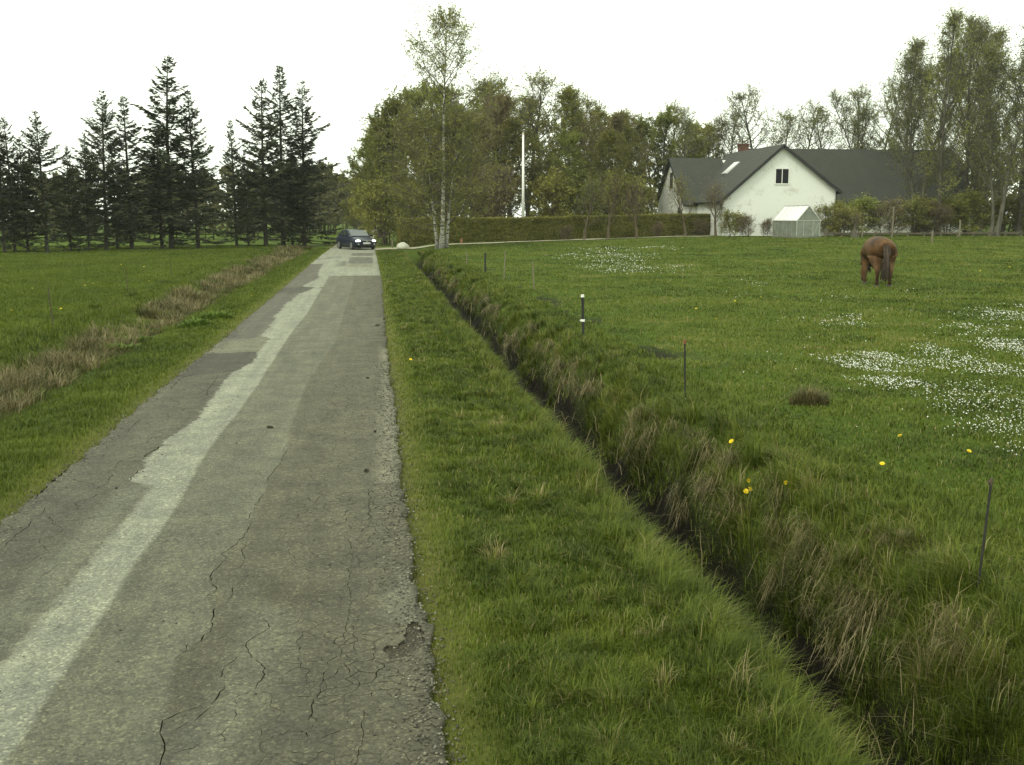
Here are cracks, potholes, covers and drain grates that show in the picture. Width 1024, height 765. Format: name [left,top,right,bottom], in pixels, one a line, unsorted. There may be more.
crack [5,371,229,567]
crack [178,449,288,657]
crack [258,349,436,765]
crack [159,619,270,765]
pothole [383,620,426,659]
